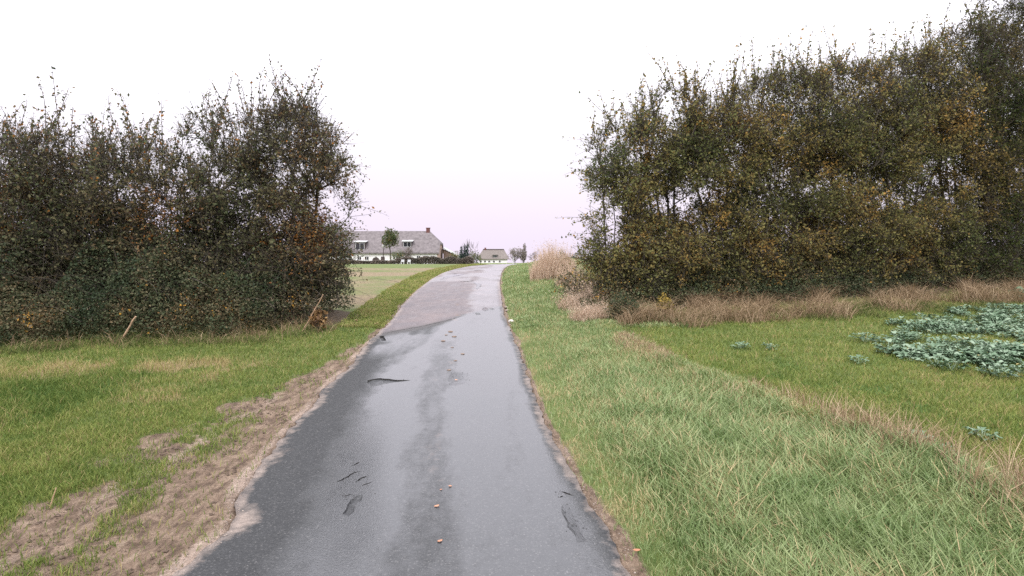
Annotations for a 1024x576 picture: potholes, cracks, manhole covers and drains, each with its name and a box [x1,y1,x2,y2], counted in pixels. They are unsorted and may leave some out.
crack [337,462,371,496]
pothole [343,495,363,516]
